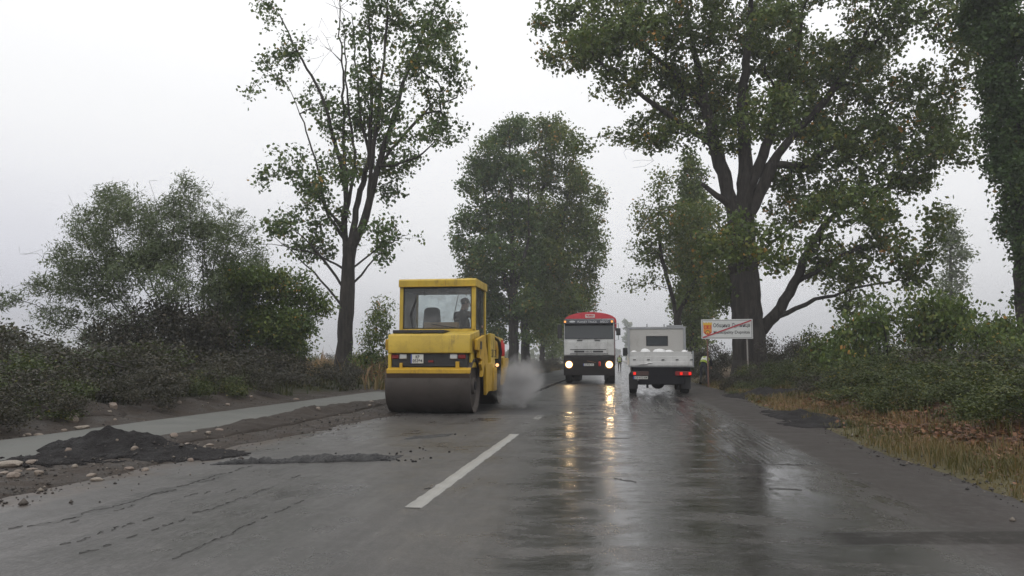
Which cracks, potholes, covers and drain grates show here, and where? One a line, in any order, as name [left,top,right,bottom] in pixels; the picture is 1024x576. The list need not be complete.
crack [8,466,304,559]
